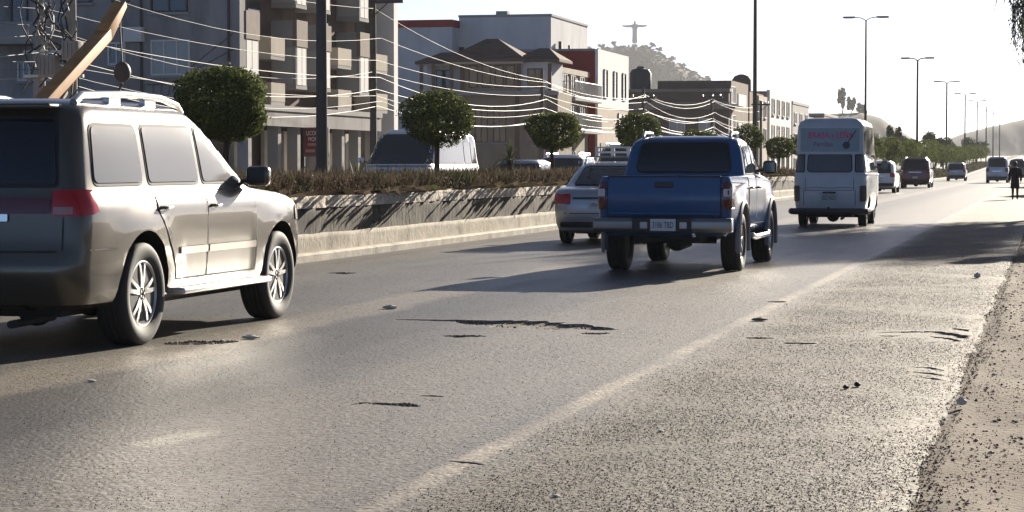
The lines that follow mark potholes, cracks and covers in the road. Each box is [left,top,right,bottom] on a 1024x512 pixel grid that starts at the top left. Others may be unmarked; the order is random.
crack [746,337,817,345]
crack [880,328,969,342]
crack [914,367,945,381]
crack [352,395,443,405]
pothole [395,319,618,330]
